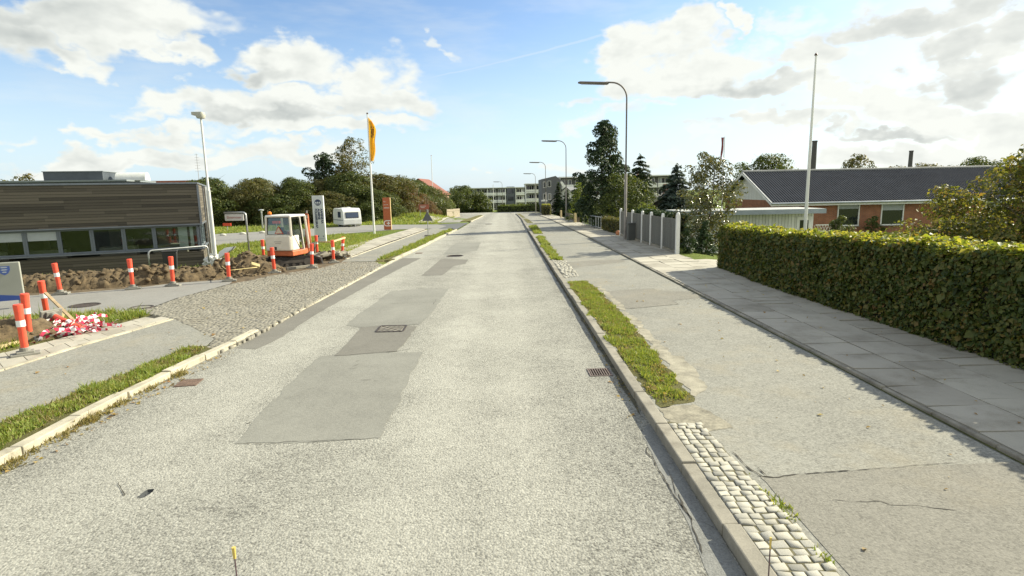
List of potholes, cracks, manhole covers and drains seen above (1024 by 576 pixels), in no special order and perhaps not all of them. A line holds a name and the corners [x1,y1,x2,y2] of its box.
drain grate [586,368,613,377]
crack [832,499,951,510]
crack [733,452,960,478]
